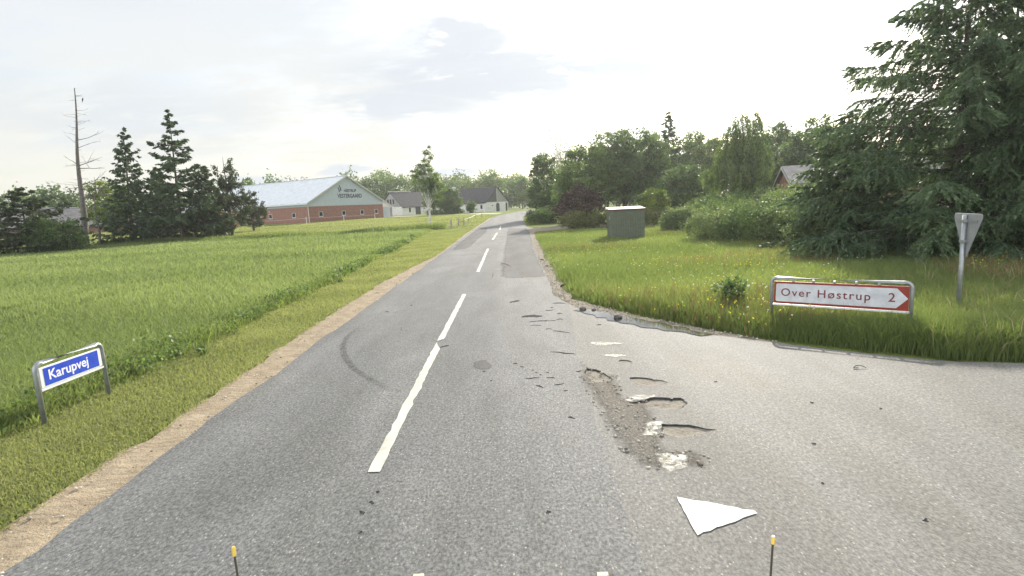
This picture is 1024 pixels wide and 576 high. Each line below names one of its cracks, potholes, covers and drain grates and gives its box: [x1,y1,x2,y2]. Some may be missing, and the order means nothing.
pothole [629,397,688,410]
pothole [661,424,715,438]
crack [509,300,569,333]
pothole [629,377,668,386]
pothole [584,368,613,382]
